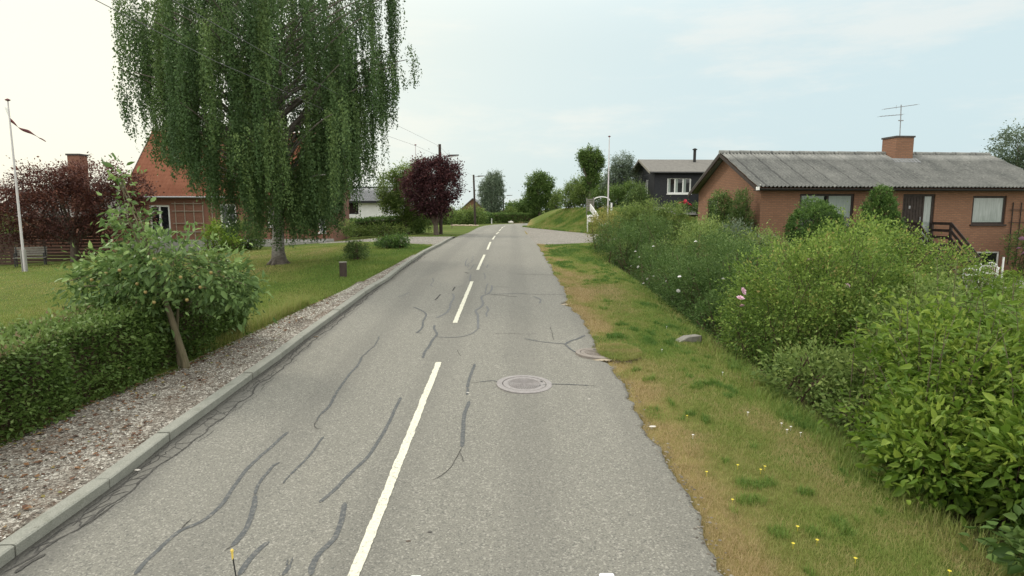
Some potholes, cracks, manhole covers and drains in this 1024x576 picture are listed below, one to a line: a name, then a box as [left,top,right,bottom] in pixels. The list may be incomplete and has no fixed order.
manhole cover [576,348,611,361]
manhole cover [497,375,552,394]
crack [5,257,425,573]
